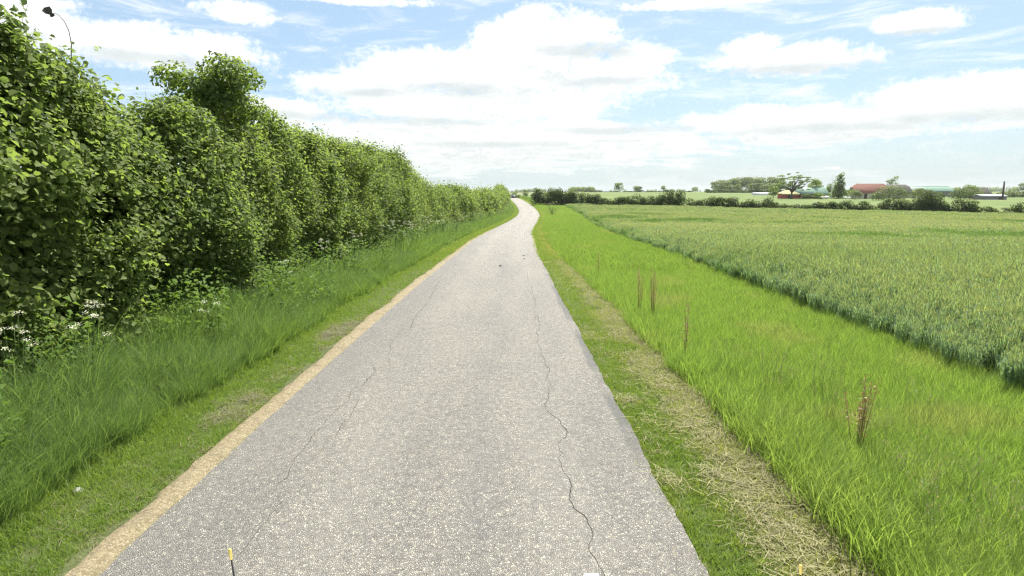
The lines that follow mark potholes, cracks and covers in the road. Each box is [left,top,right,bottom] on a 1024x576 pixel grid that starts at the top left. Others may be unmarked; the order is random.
crack [234,281,440,562]
crack [528,279,605,576]
